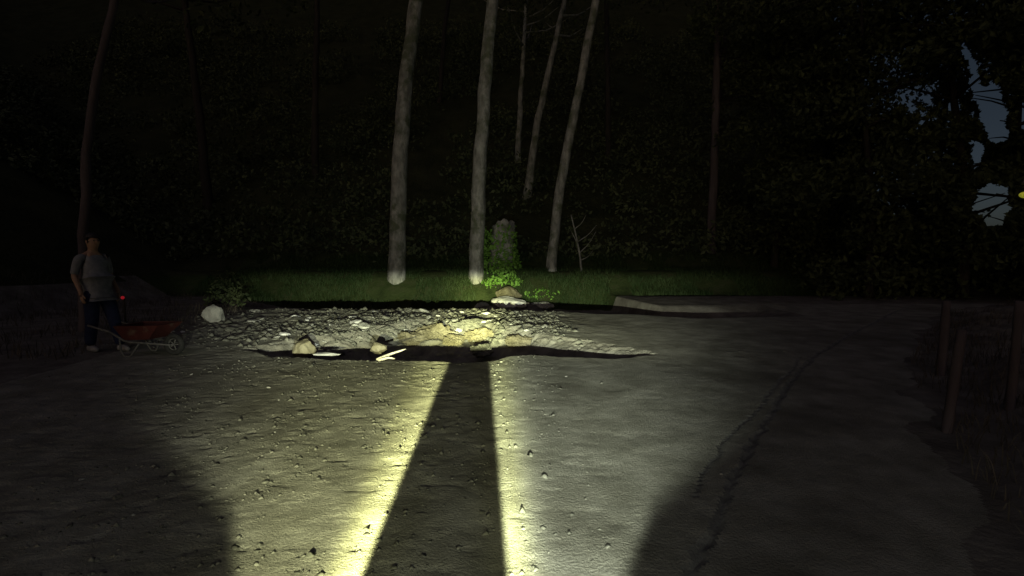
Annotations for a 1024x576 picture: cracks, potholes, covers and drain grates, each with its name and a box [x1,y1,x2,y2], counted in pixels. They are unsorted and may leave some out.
pothole [238,318,659,364]
crack [678,304,915,576]
